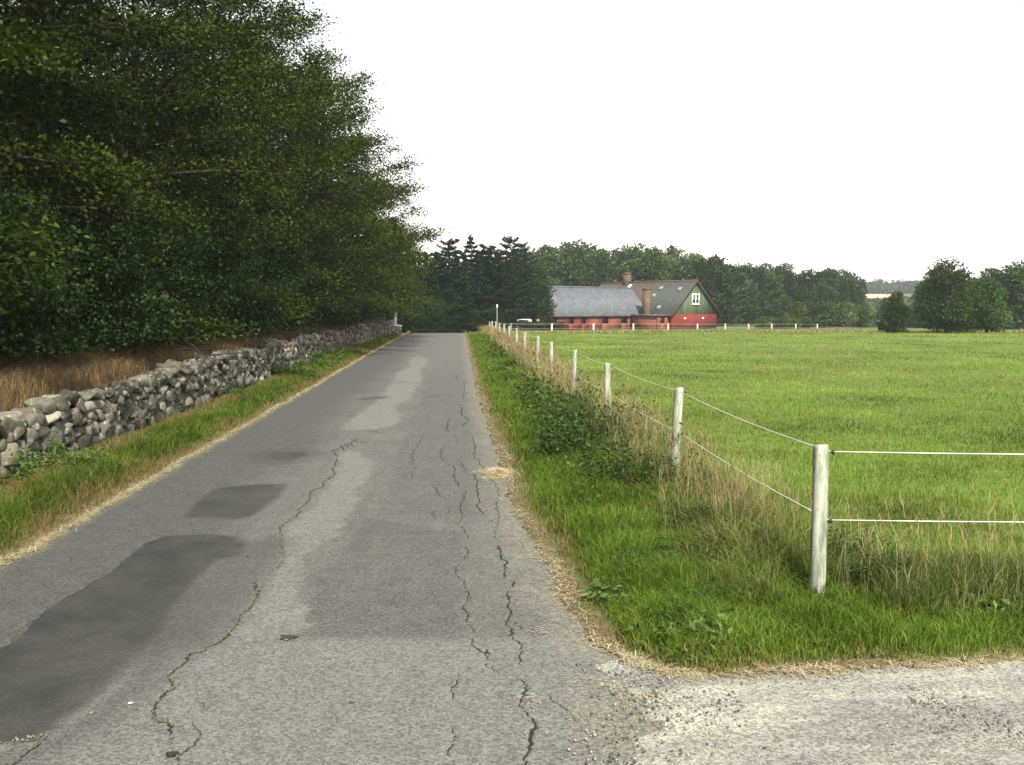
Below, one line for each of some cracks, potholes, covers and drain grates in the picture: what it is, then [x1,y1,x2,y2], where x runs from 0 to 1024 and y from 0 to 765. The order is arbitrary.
crack [151,430,382,765]
crack [9,733,49,765]
crack [410,375,576,765]
